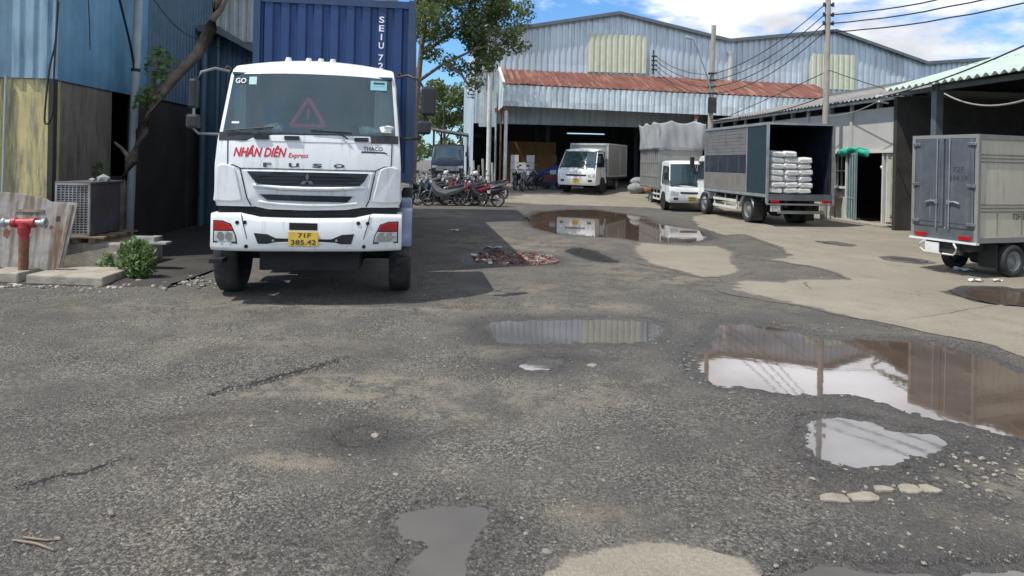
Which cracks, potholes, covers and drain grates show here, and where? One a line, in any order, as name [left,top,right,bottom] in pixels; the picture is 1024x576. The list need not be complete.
pothole [949,286,1024,307]
pothole [518,209,717,244]
pothole [334,426,388,446]
pothole [684,321,1024,445]
pothole [385,499,512,576]
pothole [790,413,967,477]
pothole [472,317,673,347]
